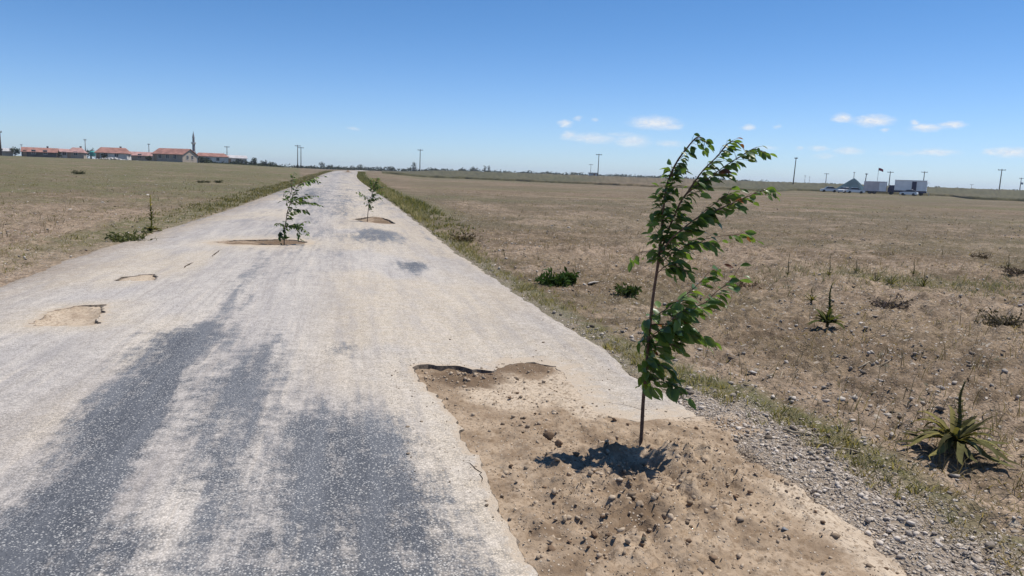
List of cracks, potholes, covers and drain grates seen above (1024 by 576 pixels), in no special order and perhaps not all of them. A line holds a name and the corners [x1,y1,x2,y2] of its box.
pothole [412,362,925,576]
pothole [29,304,106,326]
